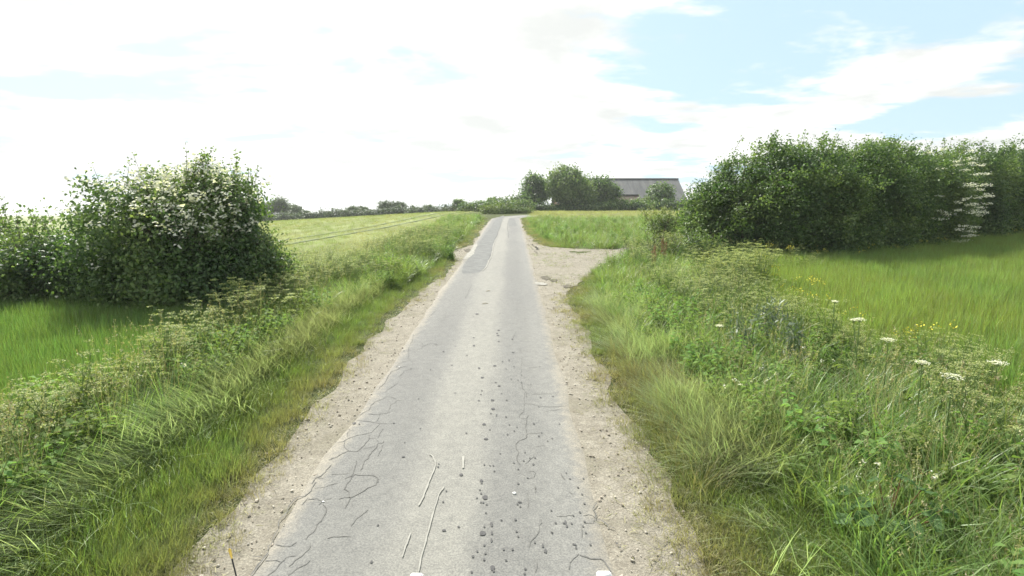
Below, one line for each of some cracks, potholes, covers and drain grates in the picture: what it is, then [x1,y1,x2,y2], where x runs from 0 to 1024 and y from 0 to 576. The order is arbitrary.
crack [568,554,612,572]
crack [513,332,563,572]
crack [251,315,446,575]
